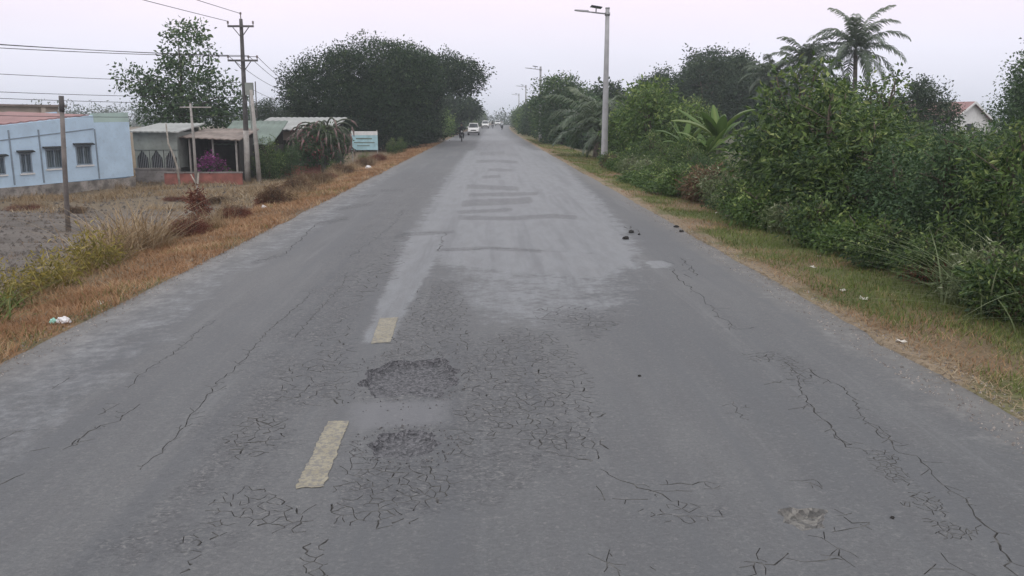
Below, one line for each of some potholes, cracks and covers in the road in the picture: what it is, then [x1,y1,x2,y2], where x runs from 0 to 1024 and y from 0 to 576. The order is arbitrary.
crack [667,258,755,330]
crack [742,351,1024,576]
crack [0,322,214,485]
crack [330,327,723,529]
crack [224,415,288,460]
pothole [366,429,442,462]
pothole [777,507,828,531]
crack [180,487,328,576]
pothole [357,357,461,398]
